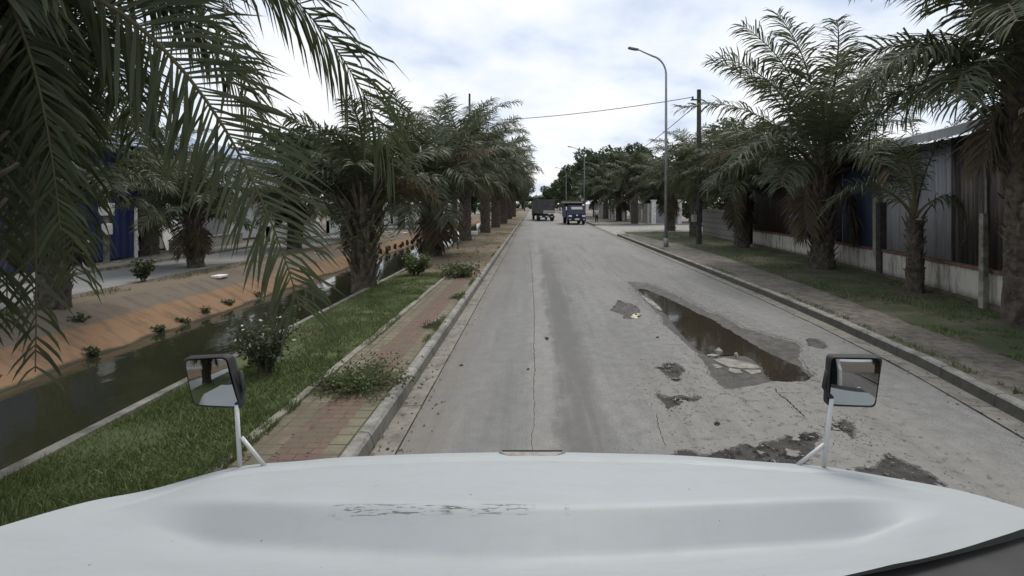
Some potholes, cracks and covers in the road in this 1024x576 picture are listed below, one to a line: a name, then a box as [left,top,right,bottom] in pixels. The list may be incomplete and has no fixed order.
pothole [655,392,704,409]
pothole [805,338,828,349]
pothole [627,282,818,390]
pothole [672,432,823,465]
pothole [610,300,641,319]
pothole [844,453,949,488]
